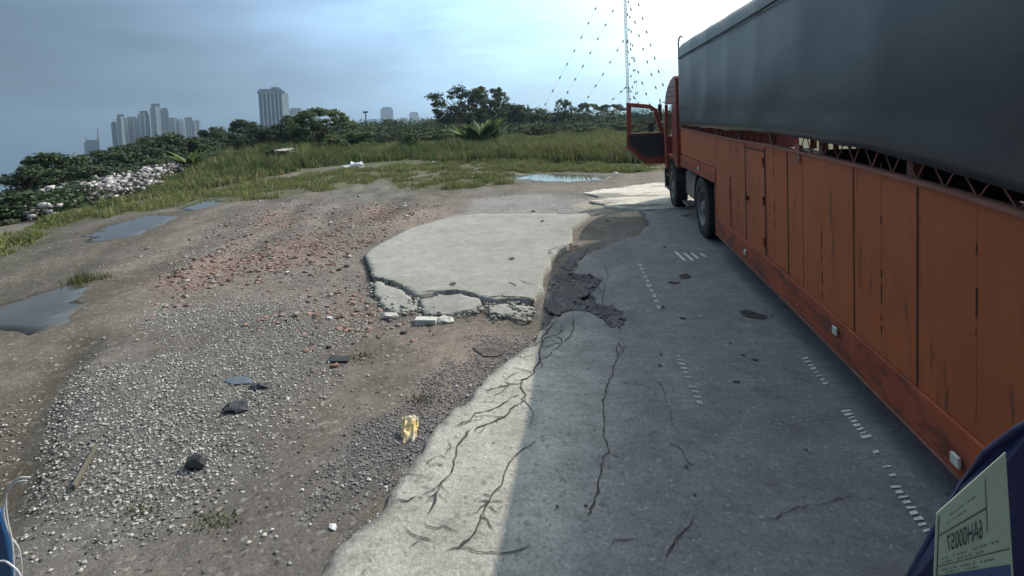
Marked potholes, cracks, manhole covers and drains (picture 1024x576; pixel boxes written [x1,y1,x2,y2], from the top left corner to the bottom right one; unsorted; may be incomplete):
crack [584,338,673,514]
crack [666,517,693,556]
crack [364,255,574,570]
pothole [545,273,624,328]
pothole [560,250,588,271]
